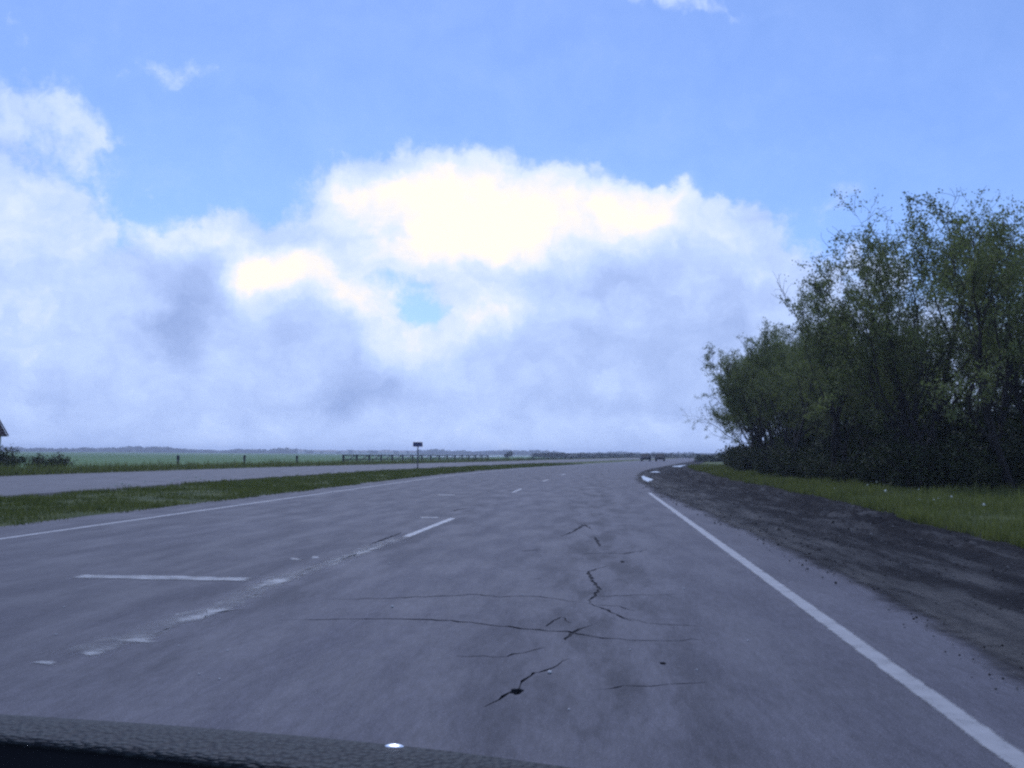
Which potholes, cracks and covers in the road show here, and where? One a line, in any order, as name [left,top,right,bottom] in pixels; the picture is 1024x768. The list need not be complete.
crack [307,525,698,707]
